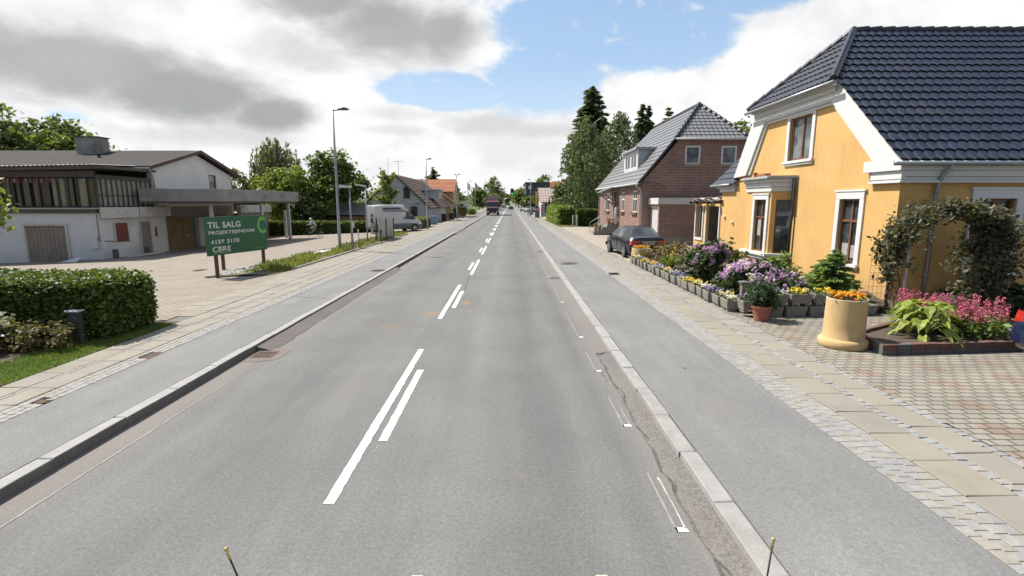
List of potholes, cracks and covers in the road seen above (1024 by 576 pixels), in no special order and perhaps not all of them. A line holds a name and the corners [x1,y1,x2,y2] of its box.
crack [597,351,733,576]
drain grate [240,348,292,362]
